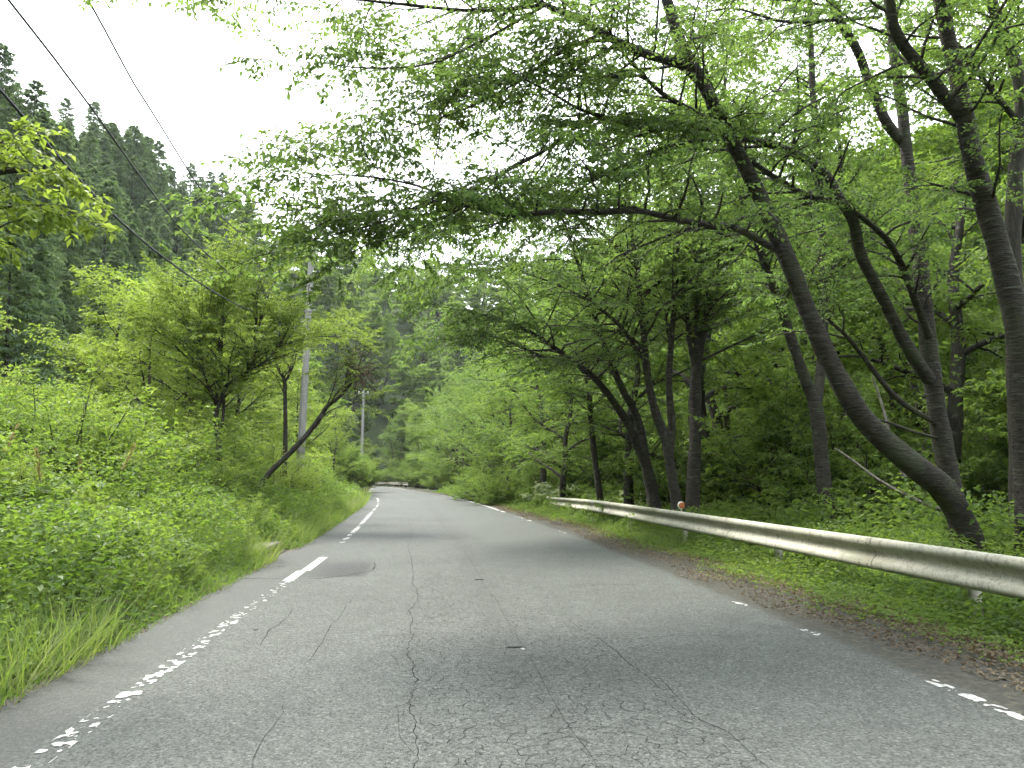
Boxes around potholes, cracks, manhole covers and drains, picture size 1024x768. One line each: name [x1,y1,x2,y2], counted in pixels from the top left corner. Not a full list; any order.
crack [252,538,769,768]
